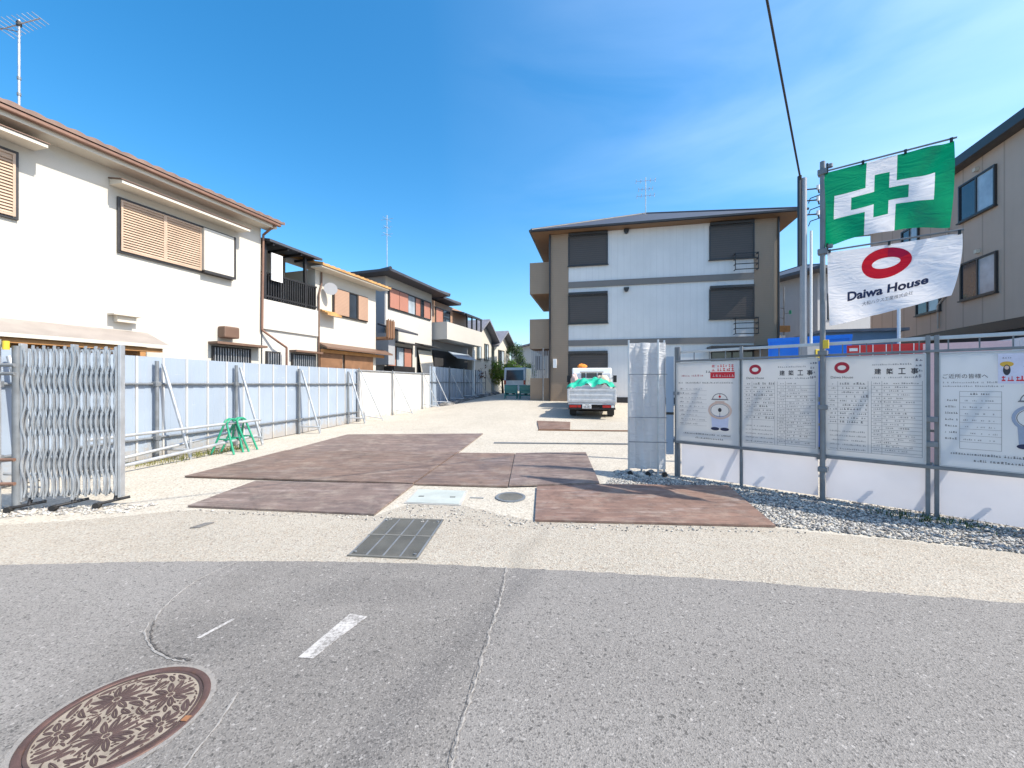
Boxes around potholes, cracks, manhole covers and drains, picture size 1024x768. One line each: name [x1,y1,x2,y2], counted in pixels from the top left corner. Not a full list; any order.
utility cover [404,489,468,506]
manhole cover [0,664,217,768]
manhole cover [495,492,526,503]
crack [143,561,239,662]
drain grate [347,518,444,560]
